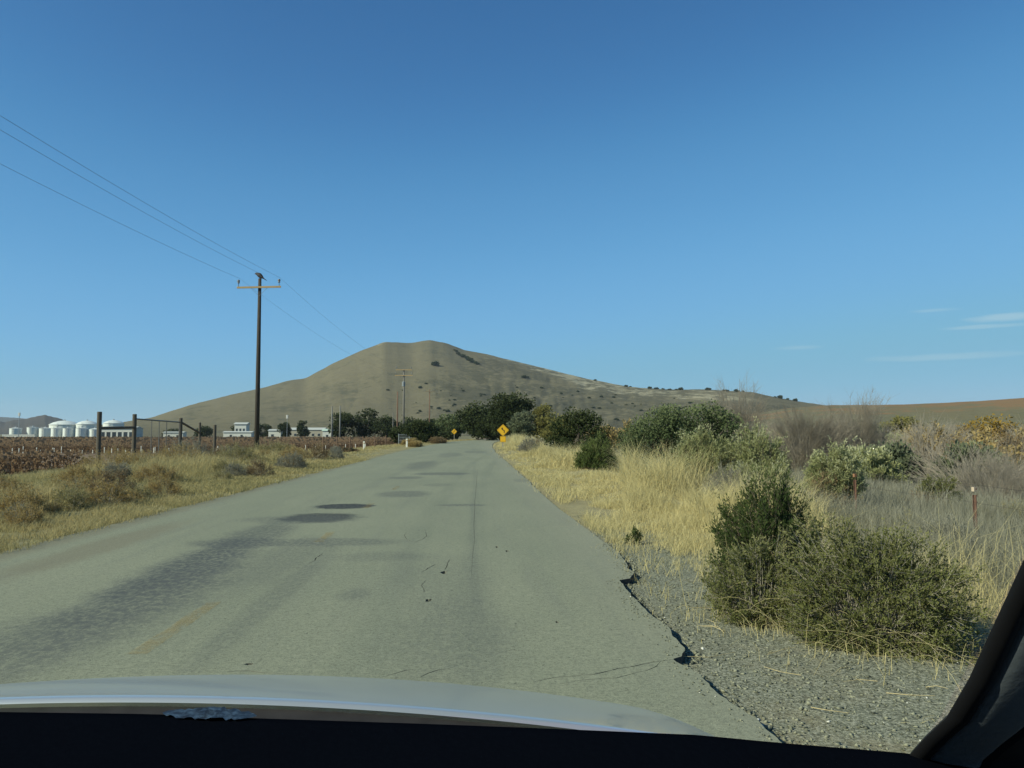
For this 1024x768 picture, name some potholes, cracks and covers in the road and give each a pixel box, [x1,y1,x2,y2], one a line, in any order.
crack [534,659,673,684]
